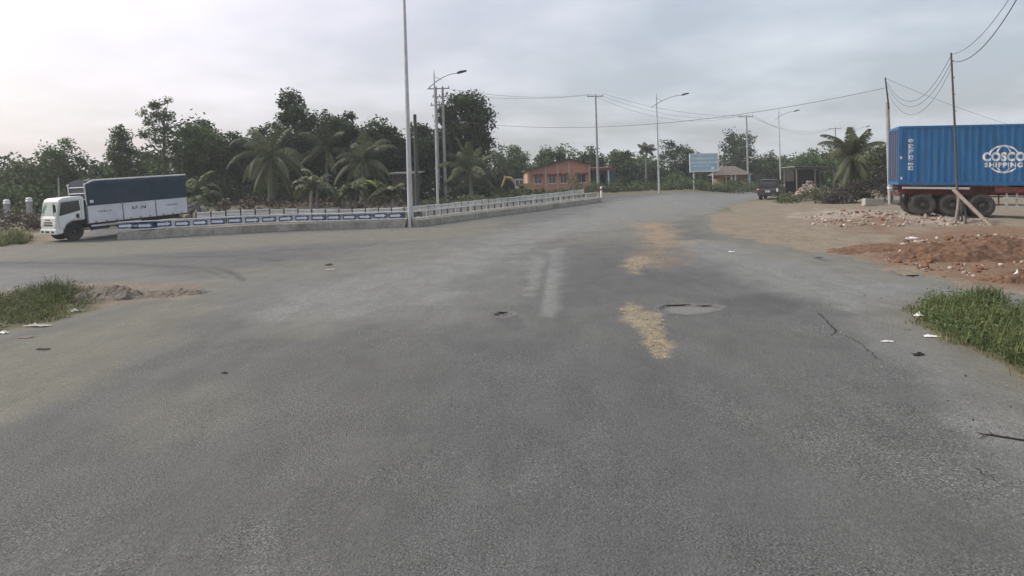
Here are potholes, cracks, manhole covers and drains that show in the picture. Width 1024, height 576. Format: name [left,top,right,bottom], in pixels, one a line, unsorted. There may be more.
pothole [488,310,518,318]
crack [817,312,881,360]
